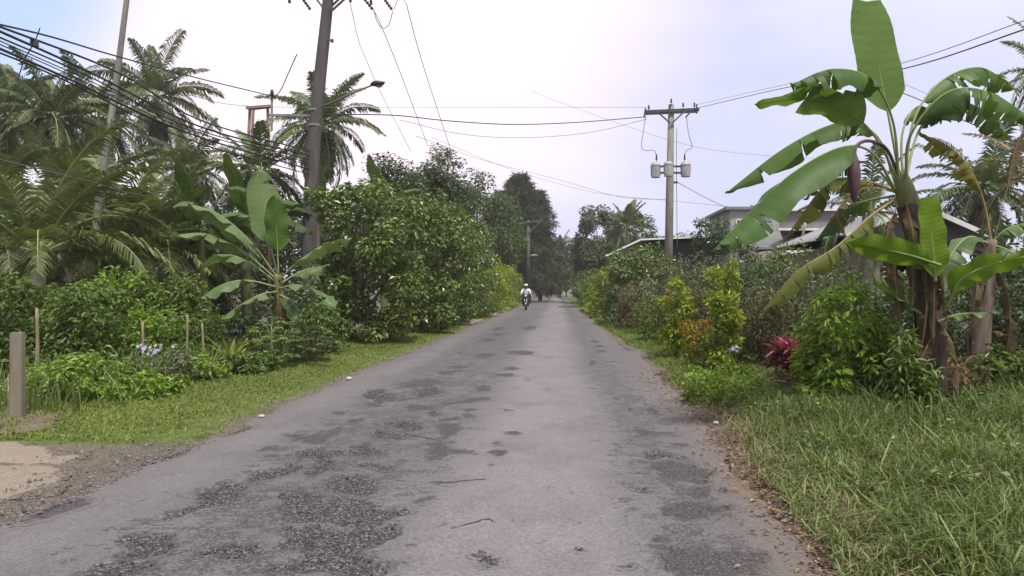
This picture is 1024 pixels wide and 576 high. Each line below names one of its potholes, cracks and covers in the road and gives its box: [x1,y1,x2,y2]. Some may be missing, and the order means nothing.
pothole [465,548,507,569]
pothole [312,471,388,500]
pothole [181,538,278,563]
pothole [631,448,694,460]
pothole [255,484,431,535]
pothole [145,479,262,525]
pothole [354,387,404,409]
pothole [363,428,416,440]
pothole [406,385,452,398]
pothole [245,517,422,576]
pothole [377,418,429,432]
